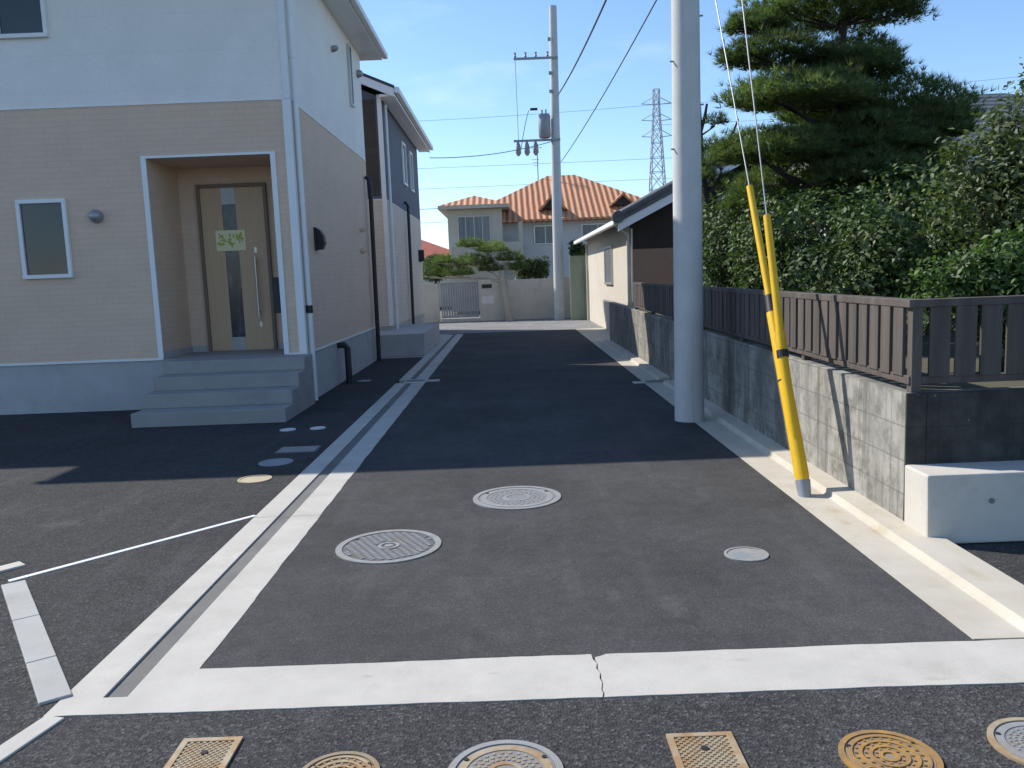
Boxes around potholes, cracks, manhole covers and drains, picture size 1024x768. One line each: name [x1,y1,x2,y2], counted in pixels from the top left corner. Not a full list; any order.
utility cover [724,547,769,562]
manhole cover [303,751,380,768]
manhole cover [335,529,441,564]
manhole cover [448,740,563,768]
manhole cover [838,730,944,768]
manhole cover [987,717,1024,765]
manhole cover [473,486,561,510]
